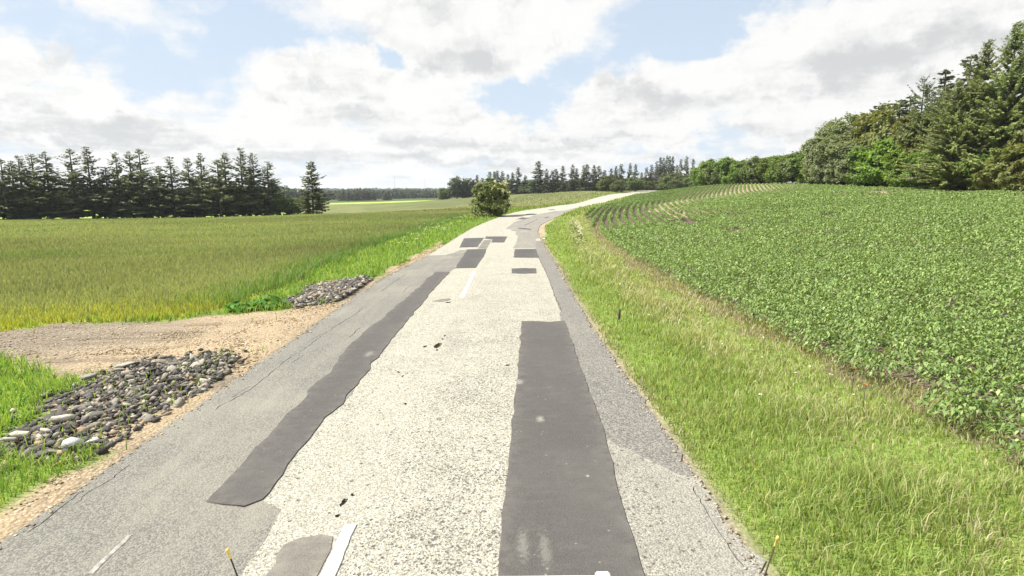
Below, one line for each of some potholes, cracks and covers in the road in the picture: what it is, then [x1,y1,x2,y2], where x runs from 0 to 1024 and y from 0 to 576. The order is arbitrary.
crack [215,308,362,410]
crack [28,466,128,532]
crack [693,487,744,567]
